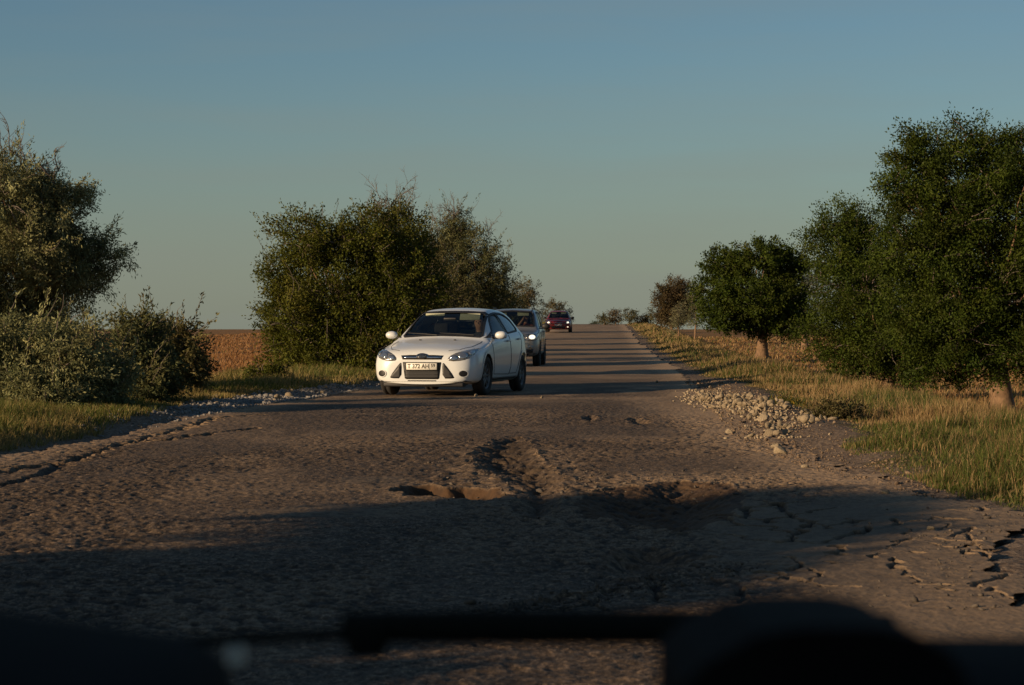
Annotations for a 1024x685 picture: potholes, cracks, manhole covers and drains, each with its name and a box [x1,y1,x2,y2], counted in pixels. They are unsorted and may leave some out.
pothole [570,480,748,535]
pothole [386,483,511,500]
pothole [624,417,654,425]
crack [478,500,1017,610]
pothole [463,436,566,521]
